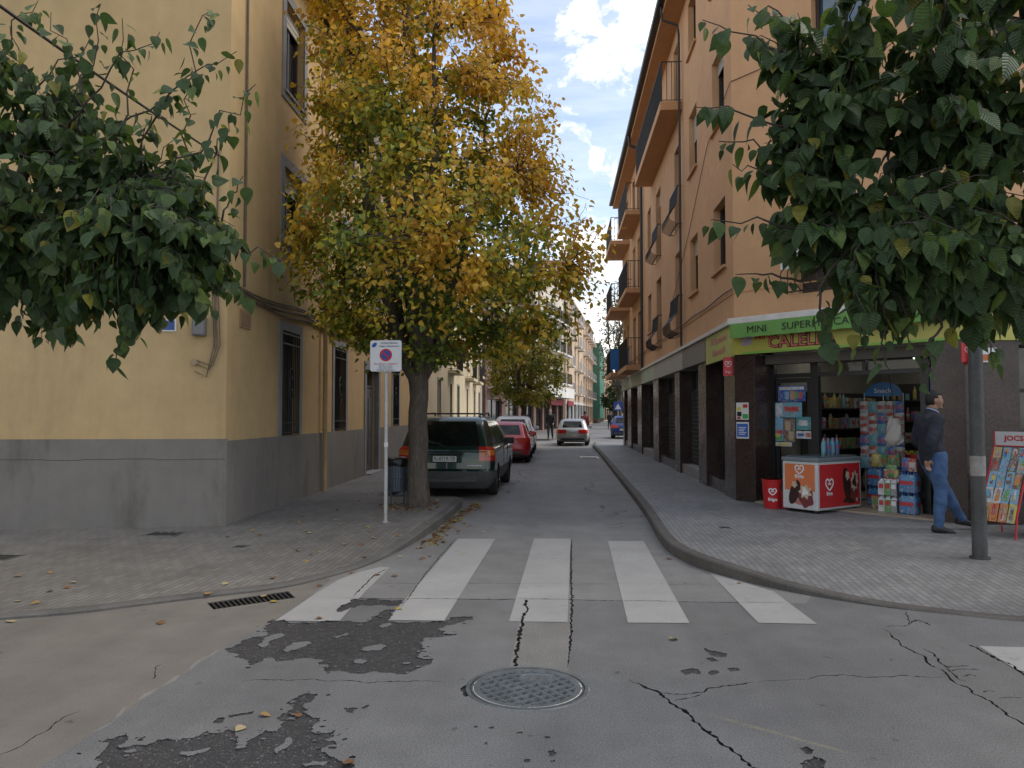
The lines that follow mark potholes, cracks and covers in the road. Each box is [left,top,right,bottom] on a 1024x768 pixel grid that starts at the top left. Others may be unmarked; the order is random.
pothole [680,648,740,675]
drain grate [207,591,296,610]
manhole cover [466,667,589,711]
pothole [77,691,356,768]
pothole [337,598,403,612]
crack [0,712,76,755]
crack [631,612,1024,768]
pothole [225,609,473,675]
